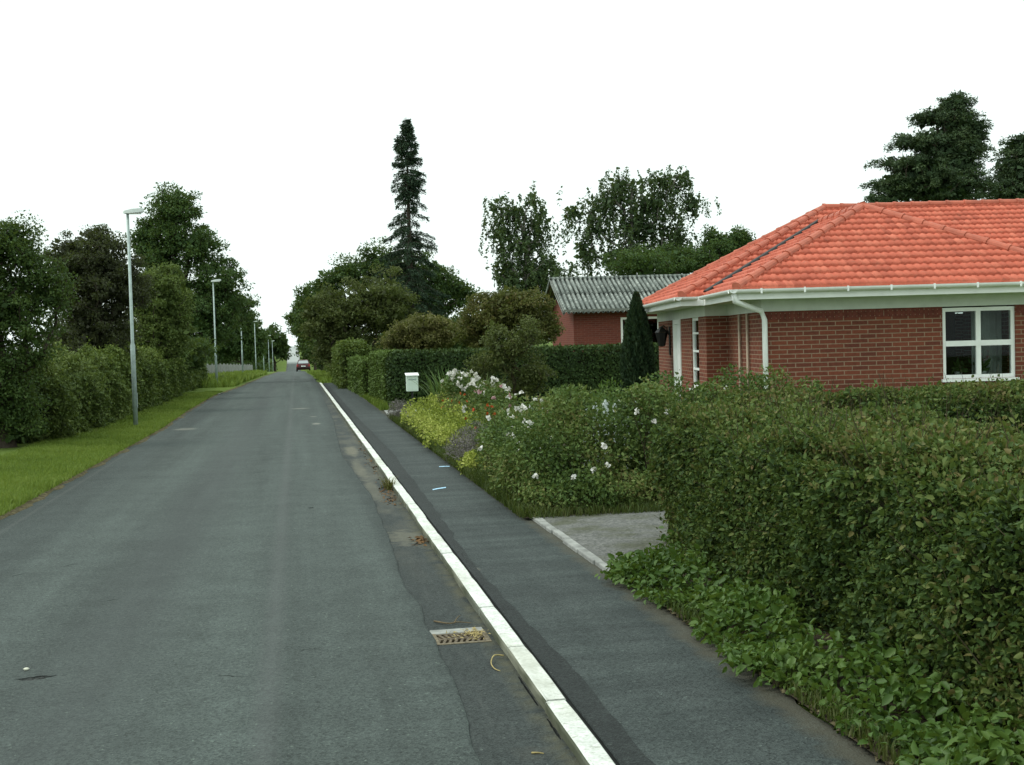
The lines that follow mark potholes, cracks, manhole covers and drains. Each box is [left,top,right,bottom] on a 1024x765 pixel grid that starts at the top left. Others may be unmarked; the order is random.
drain grate [430,627,492,646]
